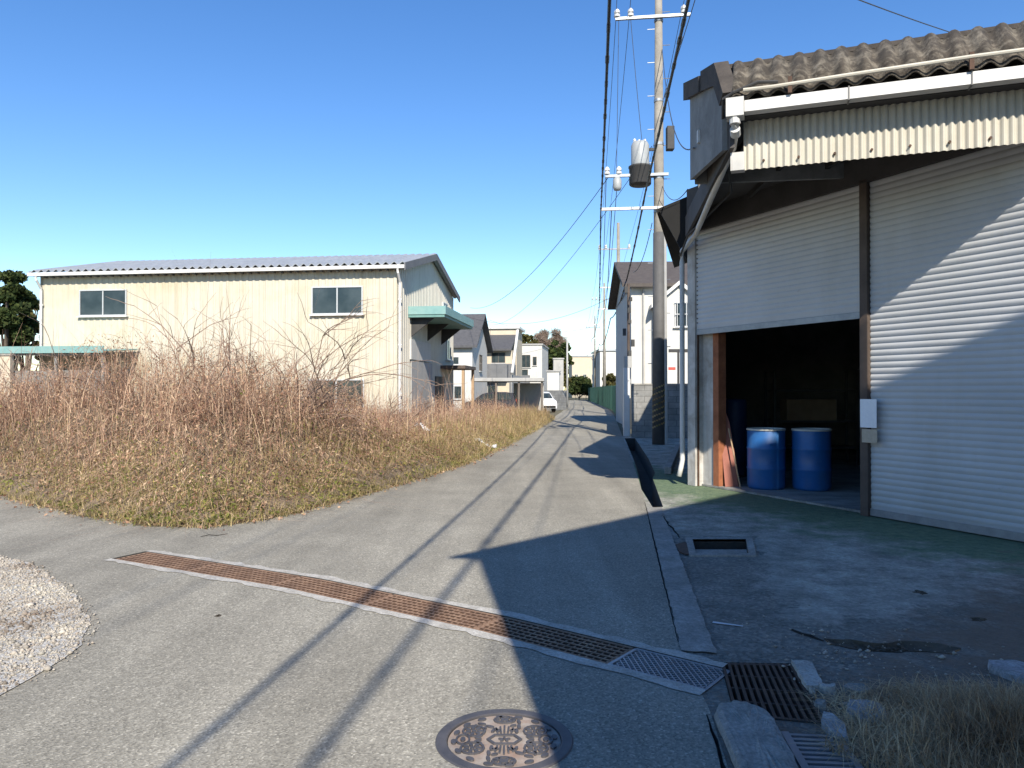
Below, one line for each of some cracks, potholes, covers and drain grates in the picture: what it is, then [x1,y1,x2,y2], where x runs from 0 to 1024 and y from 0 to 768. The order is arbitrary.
drain grate [608,648,730,690]
manhole cover [435,709,573,768]
drain grate [364,594,502,629]
drain grate [272,576,393,605]
drain grate [781,731,864,768]
pothole [824,638,961,654]
drain grate [189,563,300,585]
drain grate [118,552,216,571]
drain grate [475,617,633,664]
